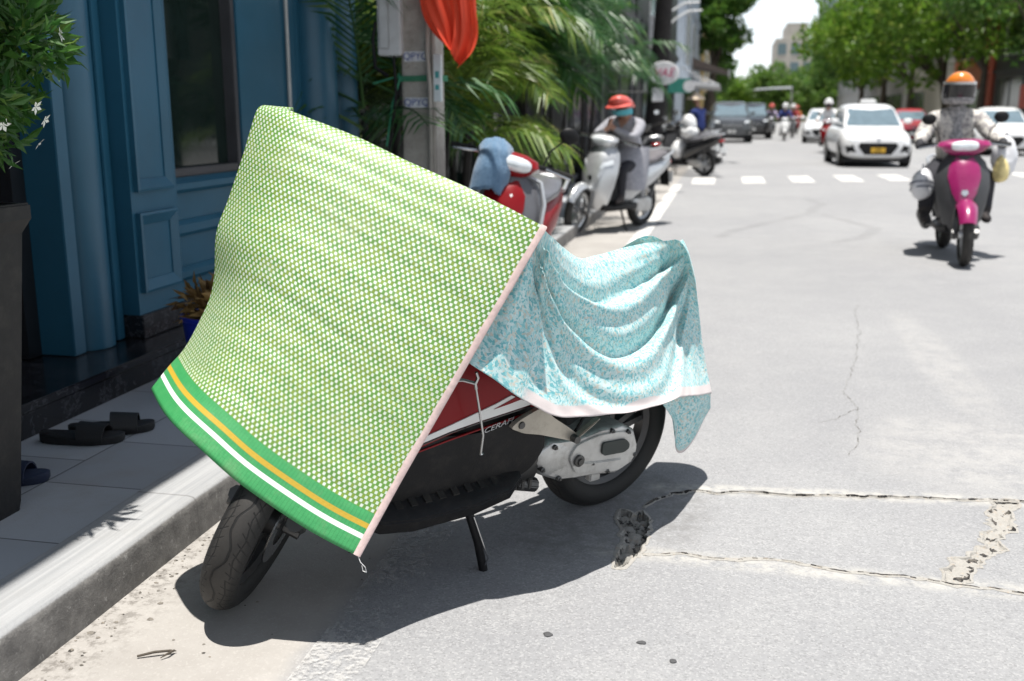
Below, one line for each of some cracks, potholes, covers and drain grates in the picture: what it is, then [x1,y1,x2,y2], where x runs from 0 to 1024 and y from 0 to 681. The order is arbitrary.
pothole [611,508,654,570]
crack [822,306,862,456]
